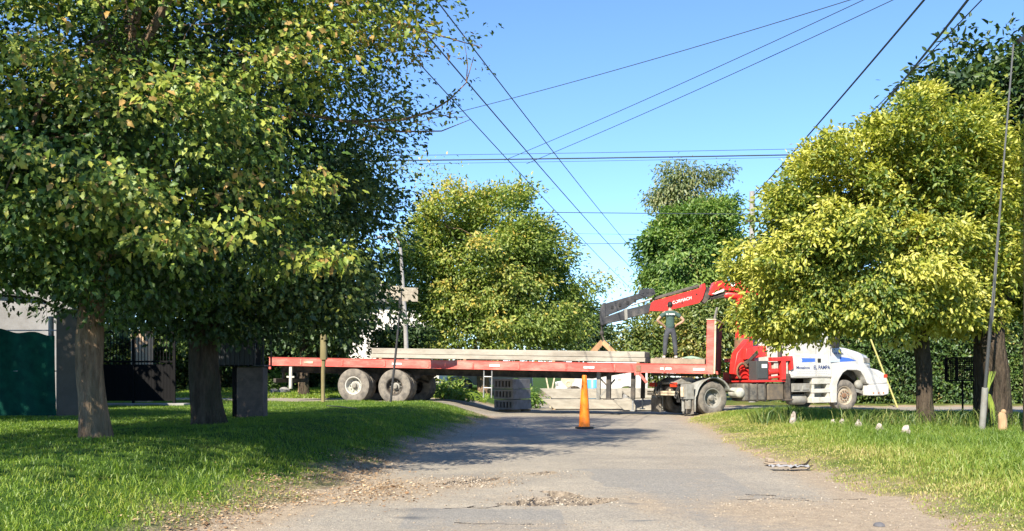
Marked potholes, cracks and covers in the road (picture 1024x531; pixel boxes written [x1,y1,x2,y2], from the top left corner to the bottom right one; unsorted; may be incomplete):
crack [737,494,858,502]
pothole [441,477,504,485]
pothole [495,491,619,506]
